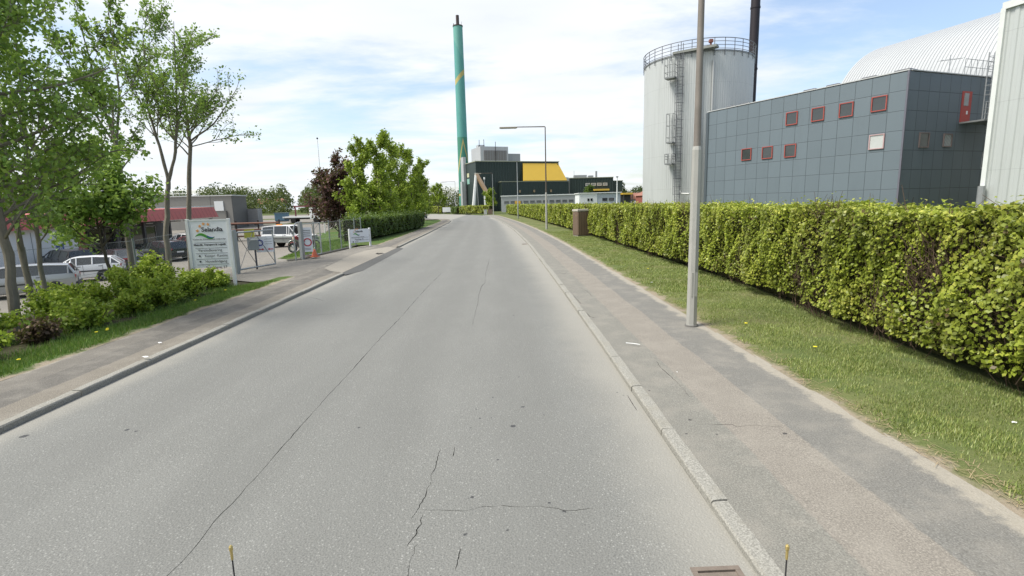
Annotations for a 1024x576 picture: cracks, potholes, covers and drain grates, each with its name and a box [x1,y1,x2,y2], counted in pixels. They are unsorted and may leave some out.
crack [407,448,591,573]
crack [167,291,424,576]
